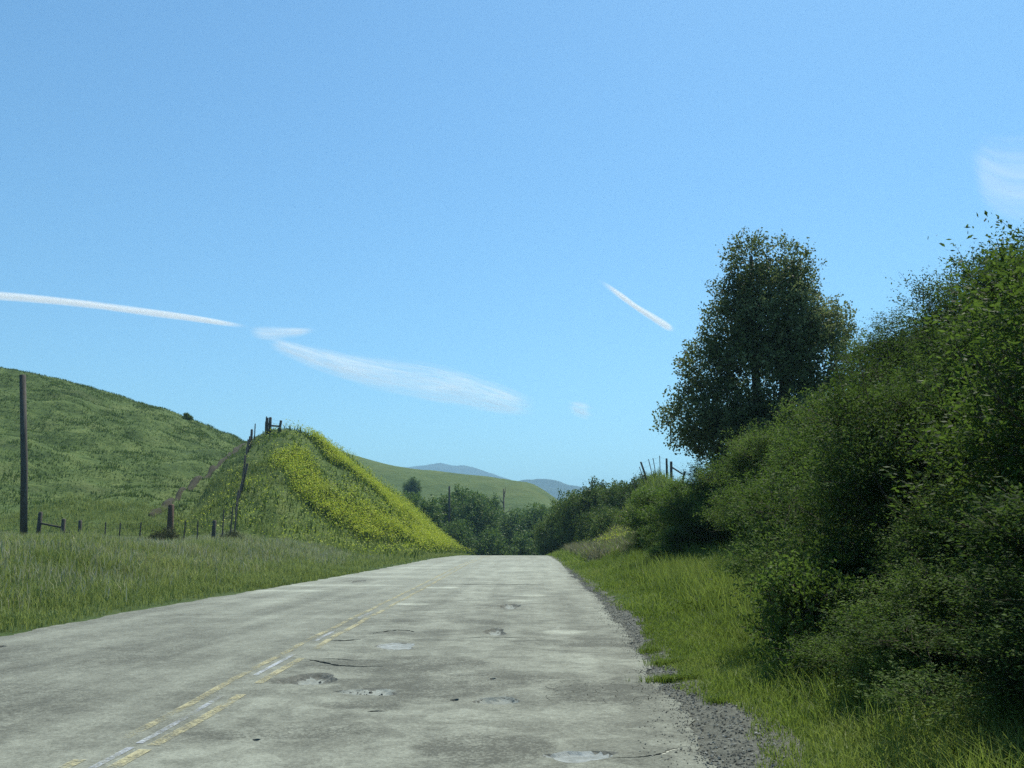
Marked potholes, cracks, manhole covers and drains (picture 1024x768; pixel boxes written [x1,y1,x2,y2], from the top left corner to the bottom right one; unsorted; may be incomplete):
crack [304,658,374,667]
pothole [483,628,506,636]
pothole [333,688,398,696]
pothole [472,696,520,705]
pothole [541,751,618,763]
pothole [276,673,338,685]
pothole [374,642,415,650]
crack [615,747,681,758]
crack [332,630,413,641]
